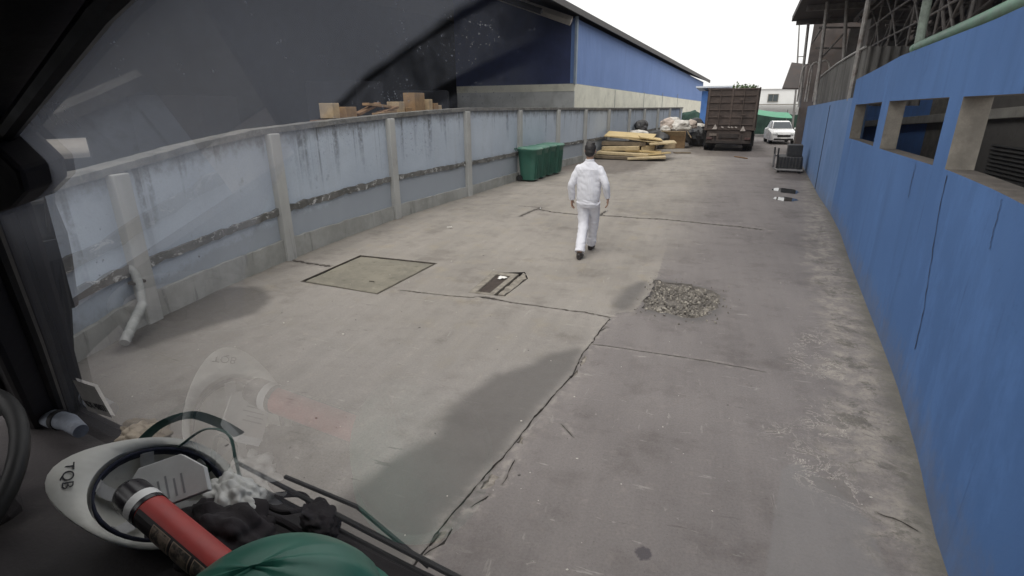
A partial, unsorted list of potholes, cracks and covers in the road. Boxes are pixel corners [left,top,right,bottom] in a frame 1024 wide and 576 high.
crack [878,513,918,531]
pothole [634,275,740,325]
drain grate [469,271,528,296]
manhole cover [300,255,437,294]
